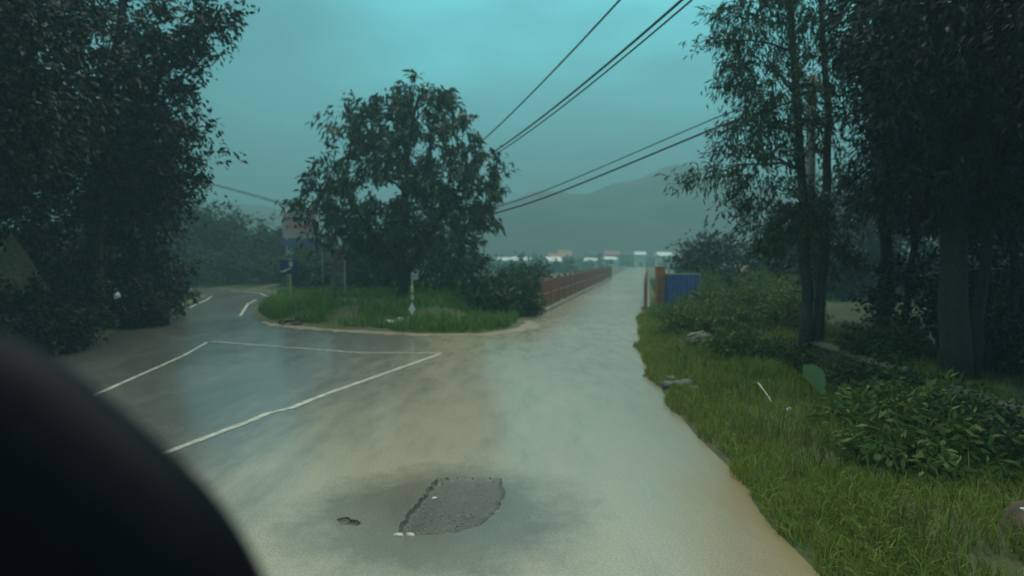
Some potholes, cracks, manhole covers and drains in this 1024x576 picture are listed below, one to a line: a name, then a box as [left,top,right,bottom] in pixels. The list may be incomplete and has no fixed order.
pothole [398,476,506,538]
pothole [337,517,360,526]
